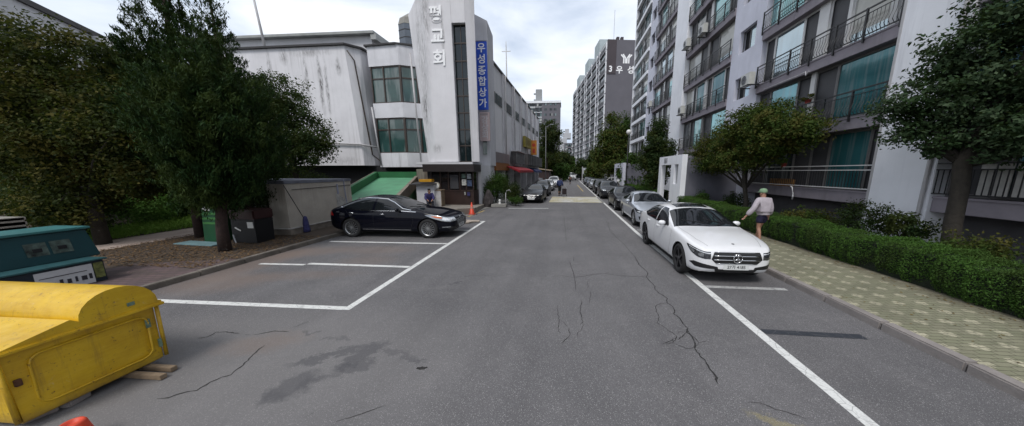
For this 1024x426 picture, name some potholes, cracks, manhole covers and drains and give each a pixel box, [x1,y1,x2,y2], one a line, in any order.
crack [157,322,306,399]
crack [475,221,718,383]
